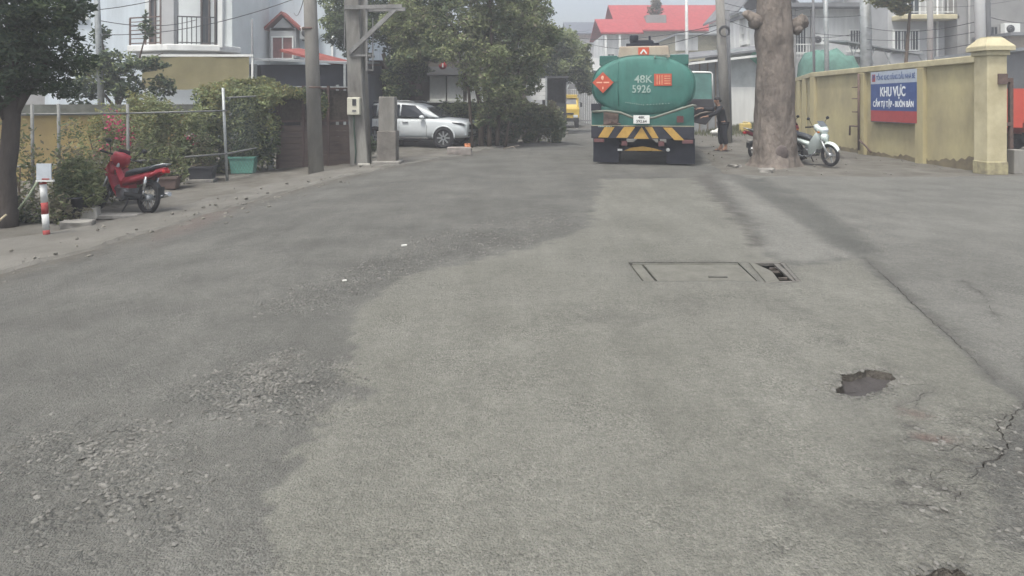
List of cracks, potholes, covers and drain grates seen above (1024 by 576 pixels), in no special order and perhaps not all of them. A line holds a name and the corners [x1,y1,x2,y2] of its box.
crack [901,404,1024,514]
pothole [836,370,896,396]
manhole cover [628,262,757,281]
